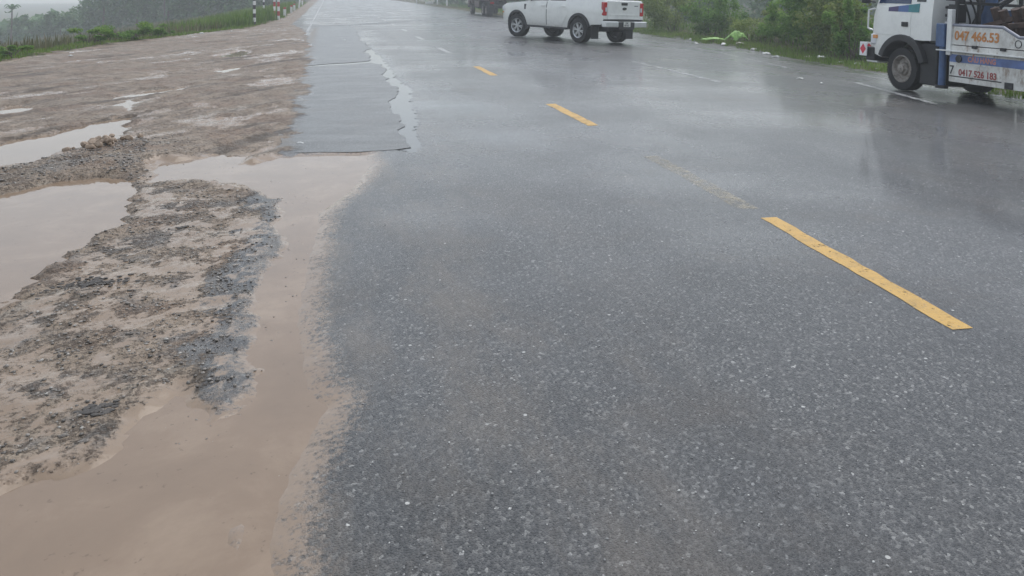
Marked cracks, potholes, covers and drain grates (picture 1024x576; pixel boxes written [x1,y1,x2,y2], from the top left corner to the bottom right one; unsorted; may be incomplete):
pothole [0,151,390,576]
pothole [0,114,138,166]
